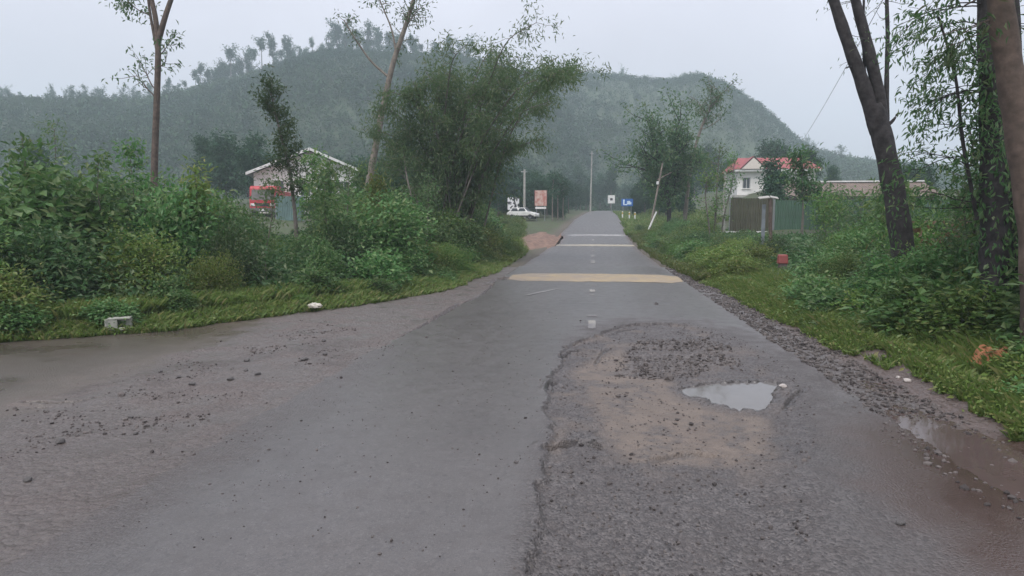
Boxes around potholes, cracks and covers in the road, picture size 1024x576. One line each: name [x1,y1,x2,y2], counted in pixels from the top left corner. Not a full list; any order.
pothole [522,322,843,576]
